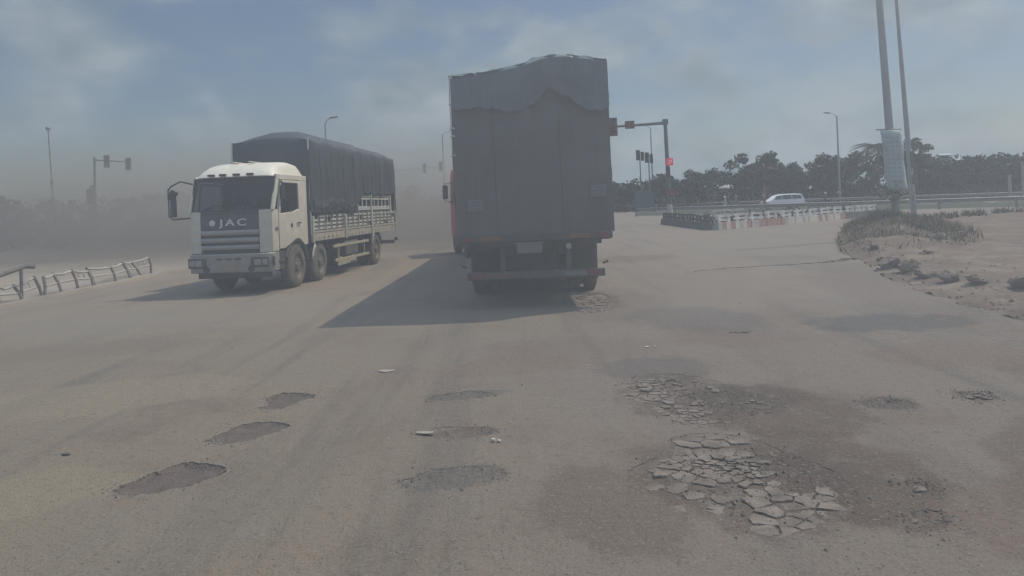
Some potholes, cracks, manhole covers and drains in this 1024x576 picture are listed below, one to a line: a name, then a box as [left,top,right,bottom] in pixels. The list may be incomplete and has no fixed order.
pothole [202,421,292,445]
pothole [415,427,496,438]
pothole [430,391,495,401]
pothole [108,461,231,497]
crack [684,256,857,273]
pothole [397,467,507,490]
pothole [257,392,317,410]
pothole [956,391,1000,402]
pothole [864,398,912,410]
